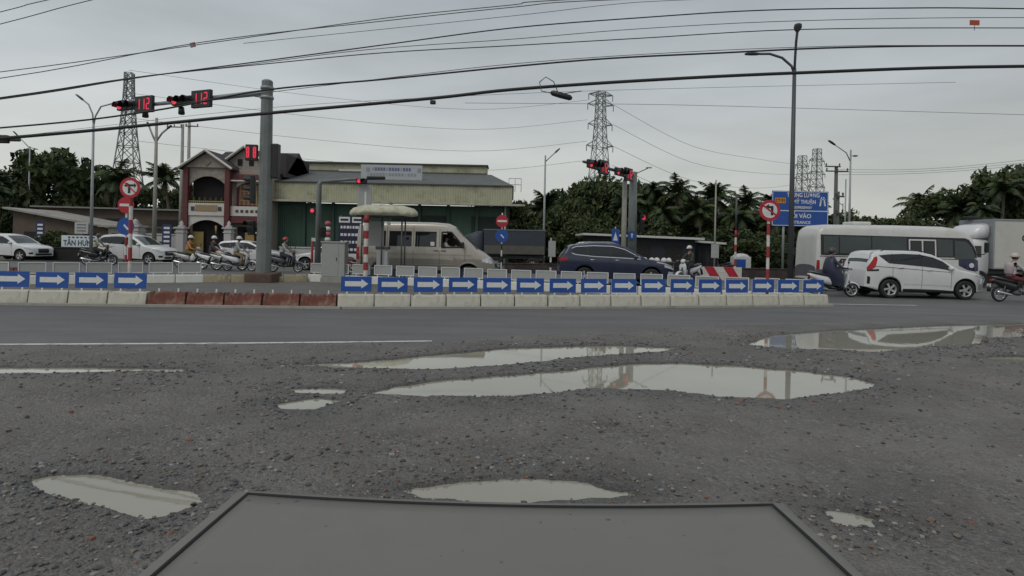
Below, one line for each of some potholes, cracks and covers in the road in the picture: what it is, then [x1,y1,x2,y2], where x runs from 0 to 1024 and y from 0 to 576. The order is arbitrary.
pothole [800,499,896,530]
pothole [0,363,191,374]
pothole [264,394,358,411]
pothole [364,360,885,400]
pothole [272,343,682,370]
pothole [743,322,1024,352]
pothole [281,384,359,395]
pothole [11,466,223,526]
pothole [378,470,651,503]
